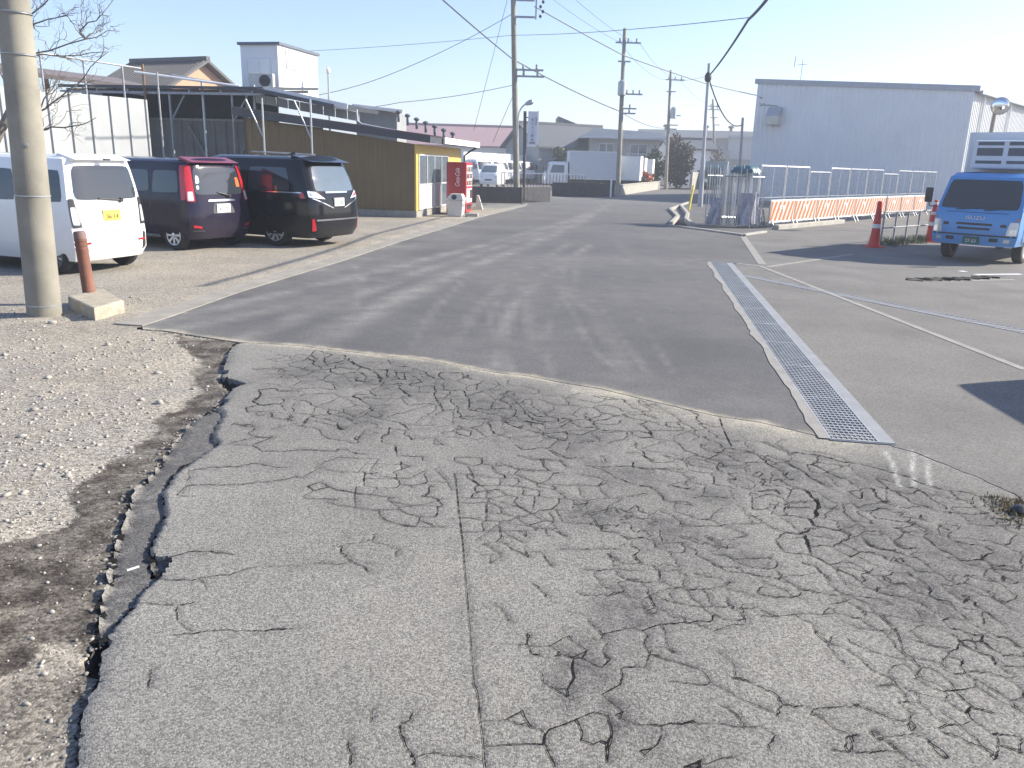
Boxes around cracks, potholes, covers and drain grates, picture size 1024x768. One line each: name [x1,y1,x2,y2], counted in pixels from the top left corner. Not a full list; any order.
drain grate [707,262,896,444]
crack [73,342,799,768]
crack [639,401,1024,768]
